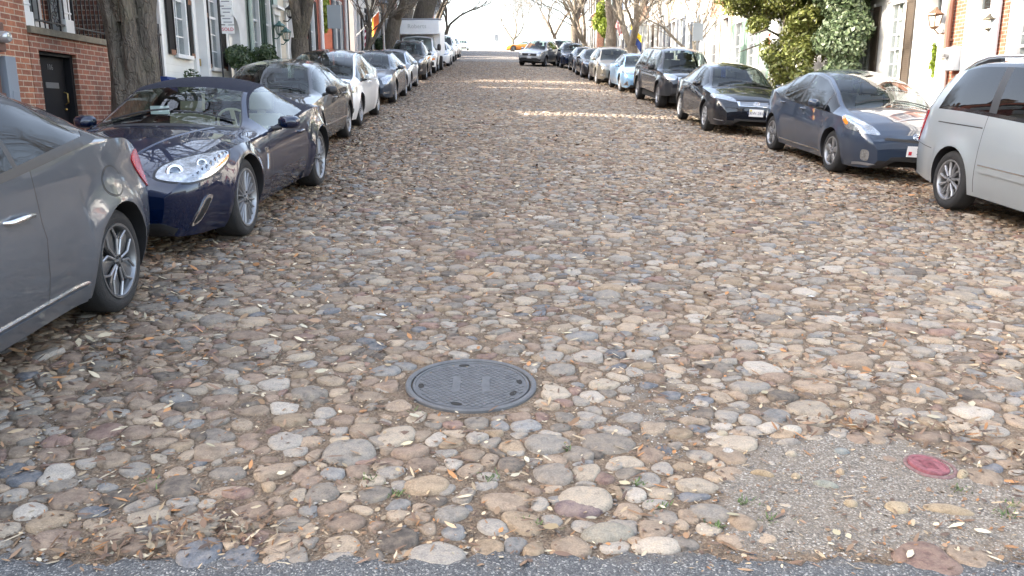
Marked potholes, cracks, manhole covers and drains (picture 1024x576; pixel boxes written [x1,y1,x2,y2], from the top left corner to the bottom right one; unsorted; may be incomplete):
manhole cover [405,359,536,414]
utility cover [903,454,958,479]
